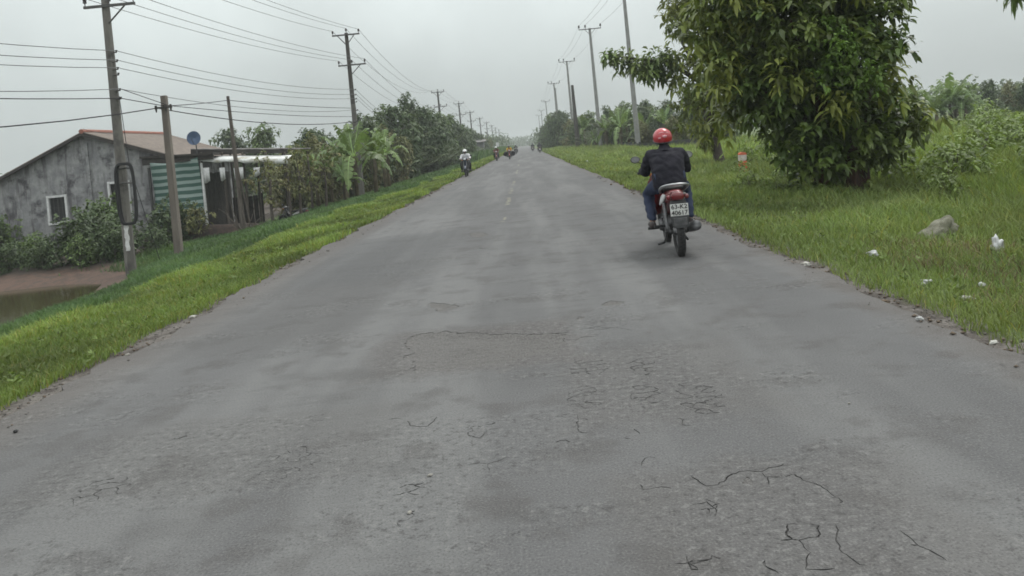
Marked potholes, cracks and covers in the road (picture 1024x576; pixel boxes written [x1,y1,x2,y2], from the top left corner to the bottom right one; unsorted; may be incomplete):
crack [675,555,719,570]
crack [901,531,947,561]
crack [691,464,843,515]
crack [781,523,861,570]
crack [627,360,722,426]
crack [71,478,130,504]
crack [555,359,610,442]
